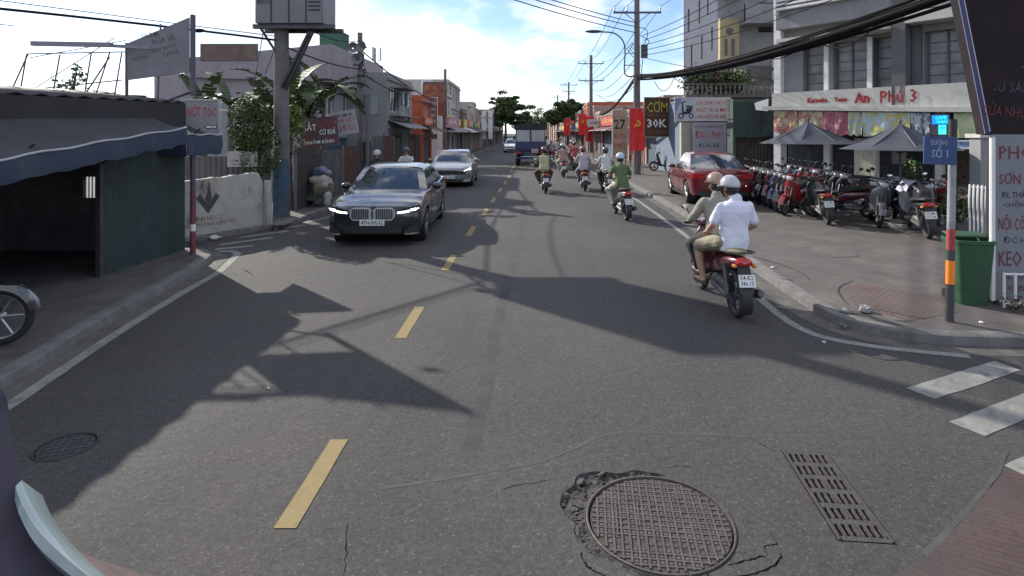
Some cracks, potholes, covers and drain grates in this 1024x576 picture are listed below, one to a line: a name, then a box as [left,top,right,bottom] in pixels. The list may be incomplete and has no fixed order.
crack [728,533,783,576]
manhole cover [586,476,737,576]
manhole cover [30,432,100,462]
drain grate [782,449,894,545]
pothole [560,470,666,562]
